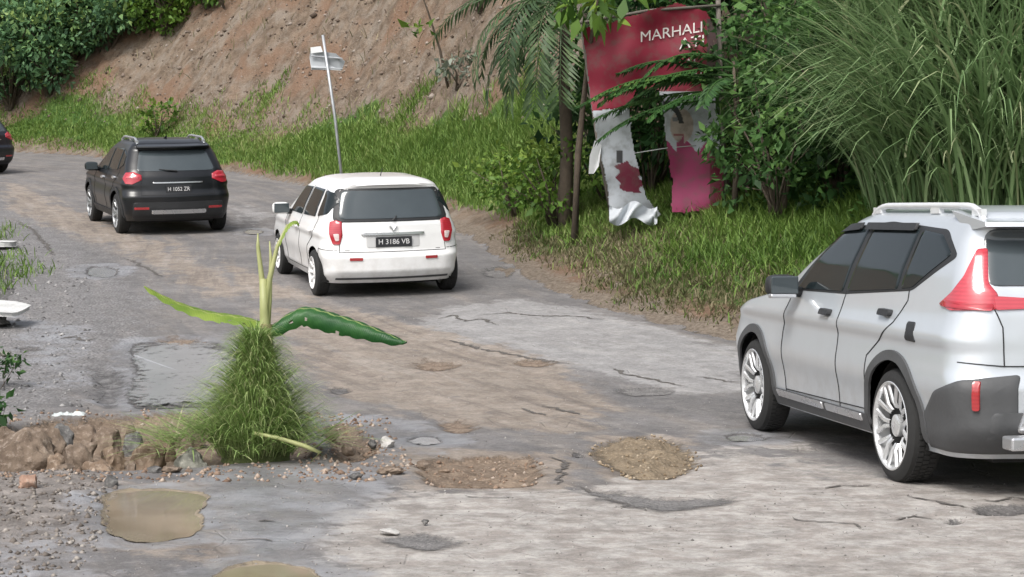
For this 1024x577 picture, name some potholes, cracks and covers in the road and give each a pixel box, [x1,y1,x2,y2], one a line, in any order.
pothole [126,340,236,409]
crack [549,456,661,513]
pothole [440,421,481,434]
pothole [414,361,462,372]
crack [794,518,863,528]
crack [438,312,603,325]
pothole [973,504,1024,516]
pothole [515,359,555,367]
crack [441,339,570,364]
pothole [99,488,210,543]
crack [612,368,683,386]
pothole [413,455,547,489]
